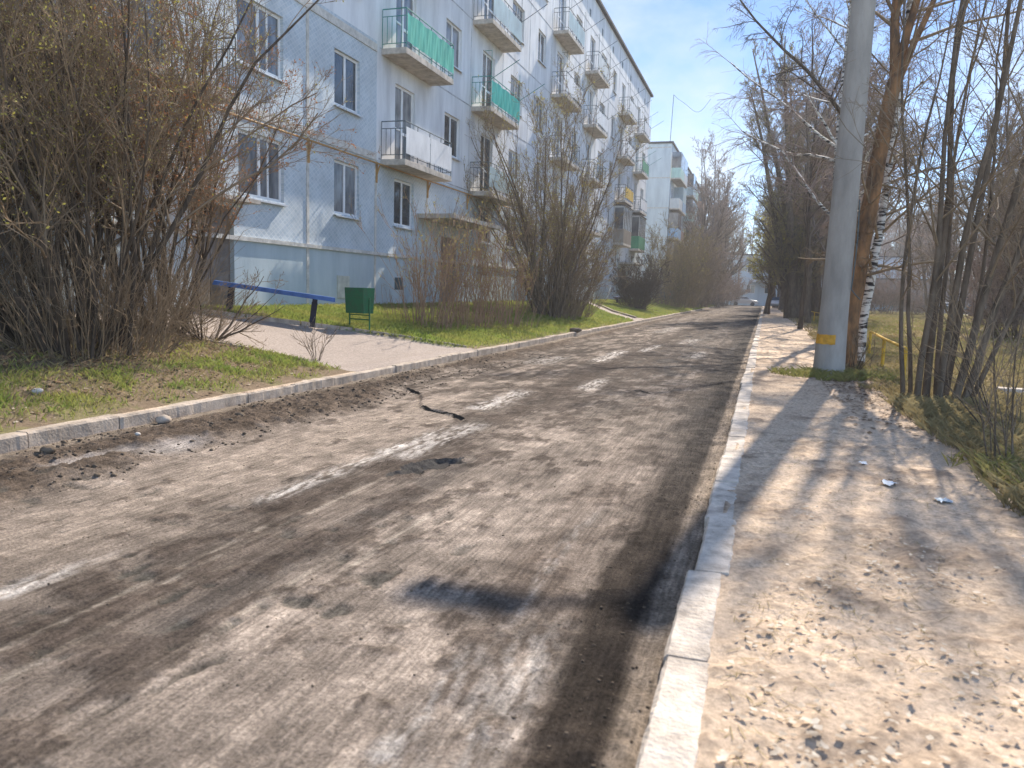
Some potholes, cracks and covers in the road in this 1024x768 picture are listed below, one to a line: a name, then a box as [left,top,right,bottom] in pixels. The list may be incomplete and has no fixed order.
pothole [385,457,467,477]
crack [403,387,464,421]
